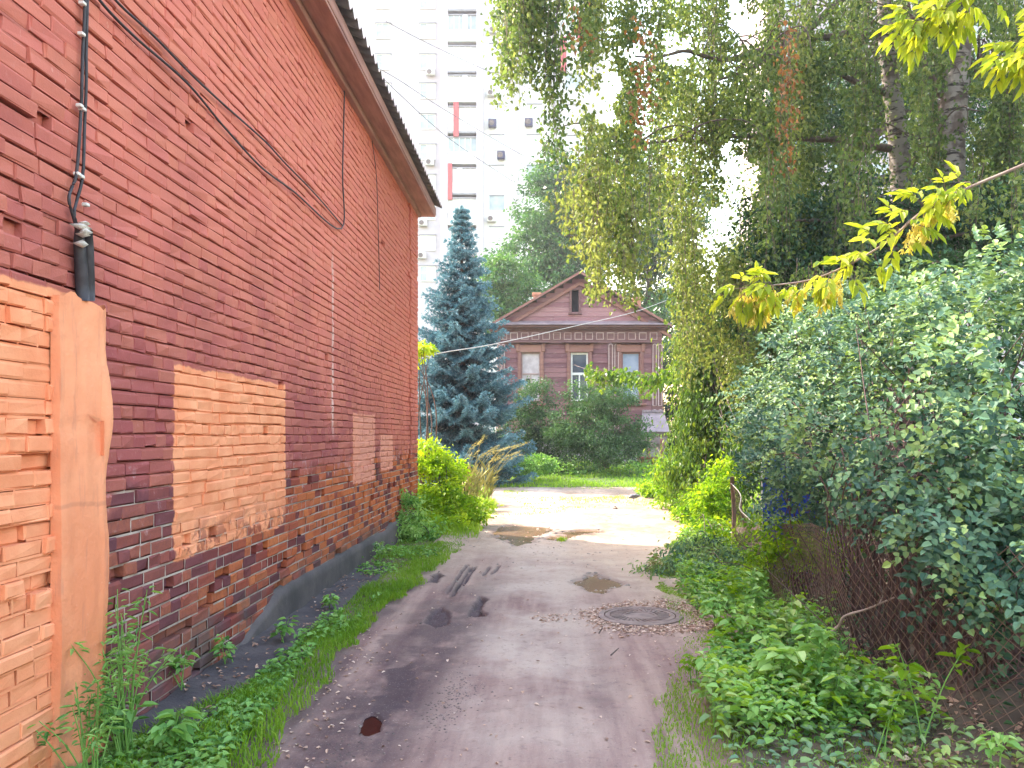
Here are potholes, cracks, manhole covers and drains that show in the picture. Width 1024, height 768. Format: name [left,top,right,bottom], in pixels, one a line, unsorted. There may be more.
pothole [484,523,562,547]
pothole [349,708,391,740]
pothole [424,571,447,583]
pothole [565,572,630,595]
pothole [463,596,492,619]
manhole cover [598,606,682,626]
pothole [540,528,605,541]
pothole [418,606,458,630]
